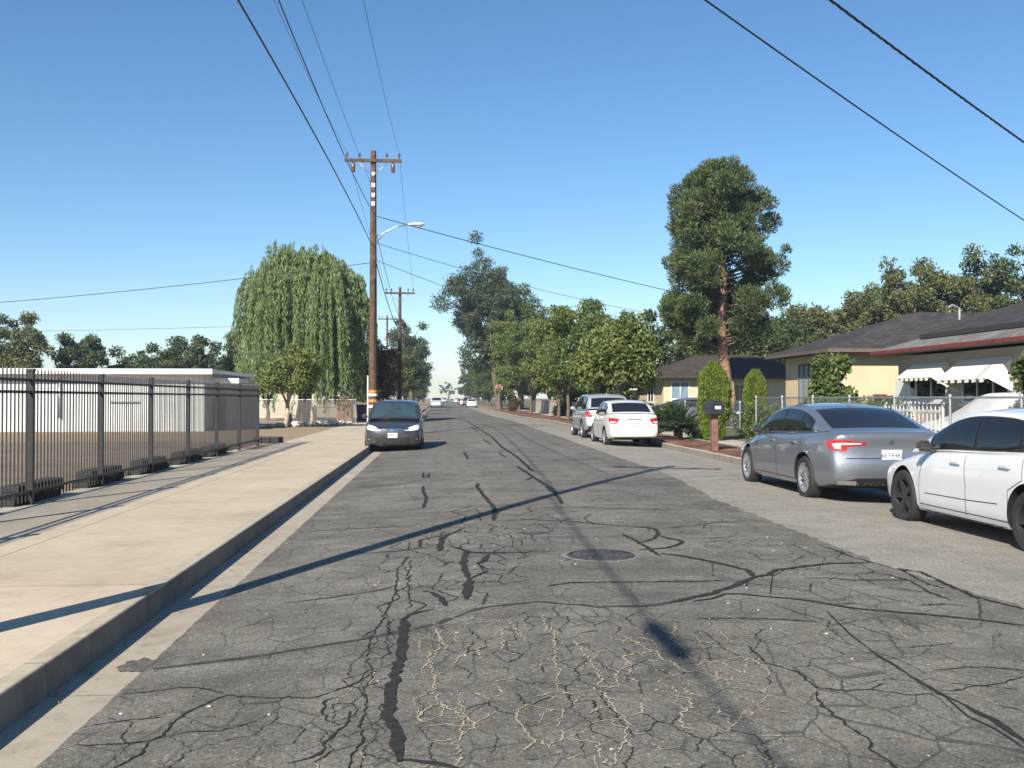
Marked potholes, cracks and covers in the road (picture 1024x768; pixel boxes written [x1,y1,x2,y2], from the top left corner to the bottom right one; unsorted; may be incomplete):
manhole cover [561,549,638,562]
crack [74,504,1024,768]
